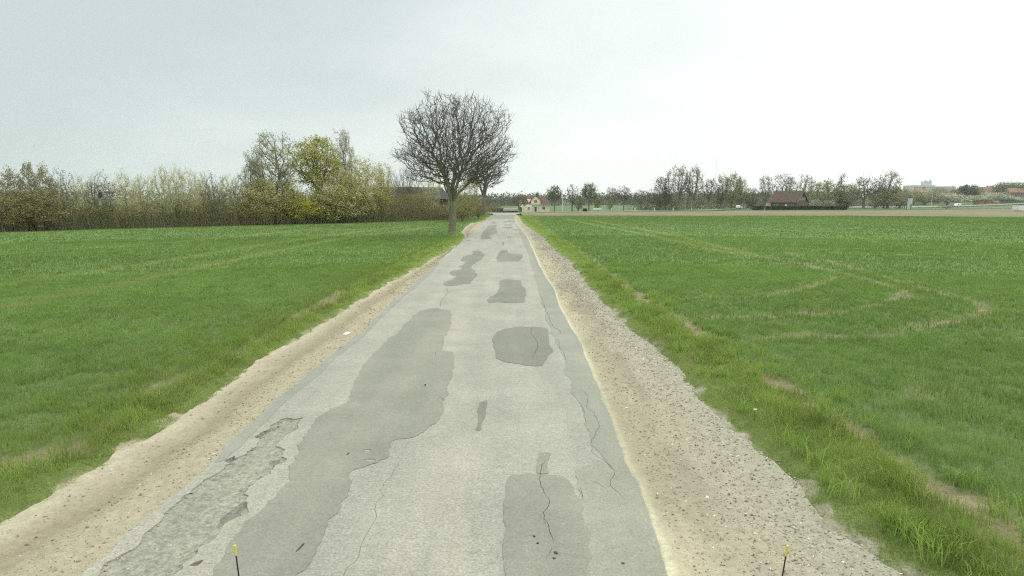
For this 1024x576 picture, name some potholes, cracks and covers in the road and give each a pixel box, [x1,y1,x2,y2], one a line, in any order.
pothole [100,419,301,576]
crack [343,463,399,576]
